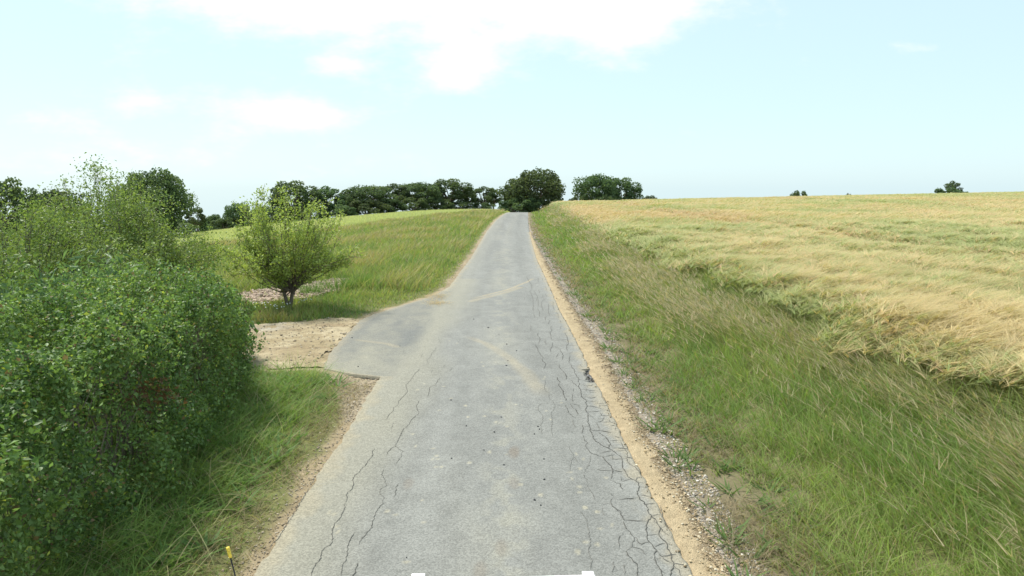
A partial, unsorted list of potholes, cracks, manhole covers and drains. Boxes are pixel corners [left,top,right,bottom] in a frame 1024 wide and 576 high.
crack [524,278,683,576]
crack [311,337,445,576]
